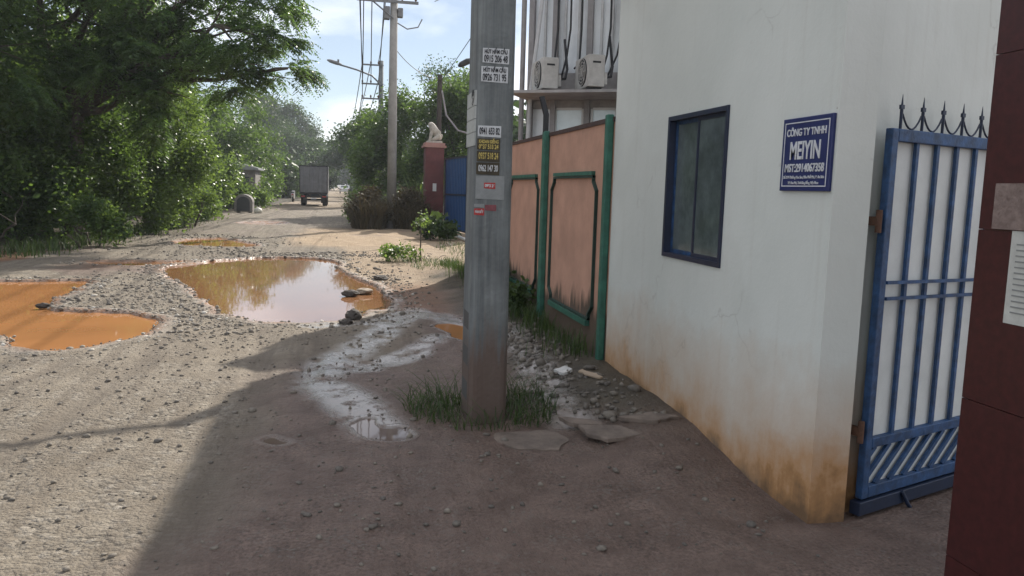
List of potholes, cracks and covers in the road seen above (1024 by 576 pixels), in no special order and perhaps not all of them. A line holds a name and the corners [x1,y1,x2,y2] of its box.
pothole [252,434,299,448]
pothole [73,259,204,267]
pothole [148,256,410,326]
pothole [342,414,421,443]
pothole [430,322,463,341]
pothole [161,237,265,248]
pothole [0,278,179,355]
